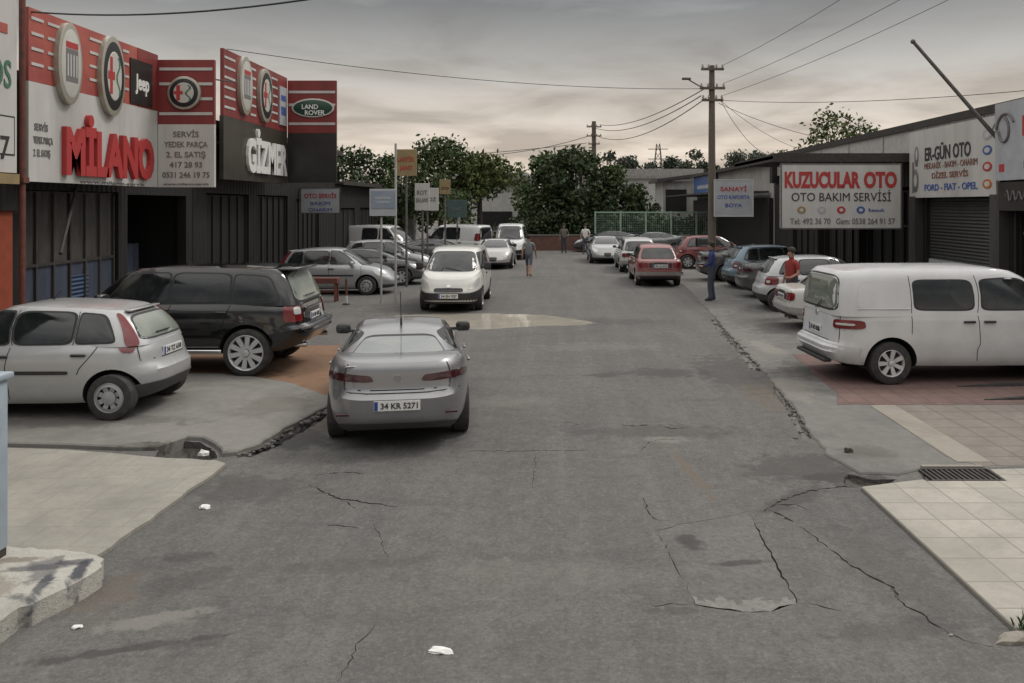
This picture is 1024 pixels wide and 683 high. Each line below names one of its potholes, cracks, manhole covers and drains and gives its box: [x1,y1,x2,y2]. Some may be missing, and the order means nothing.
crack [454,450,580,488]
crack [764,486,1000,648]
pothole [155,441,217,460]
crack [309,472,396,528]
crack [340,625,375,678]
drain grate [918,465,1005,481]
